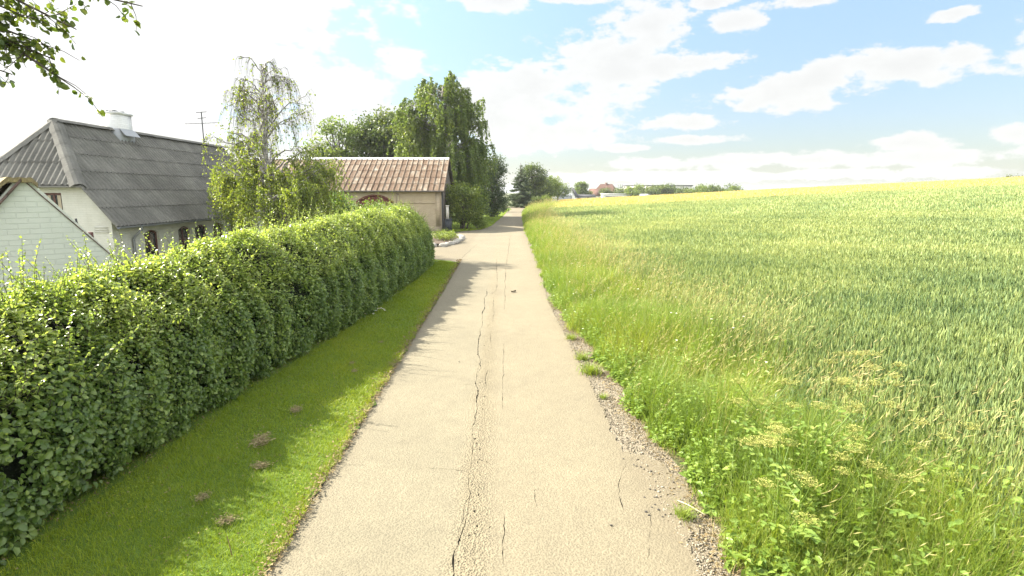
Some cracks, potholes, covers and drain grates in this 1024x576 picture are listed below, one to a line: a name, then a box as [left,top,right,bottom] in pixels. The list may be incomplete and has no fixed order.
crack [432,262,498,576]
